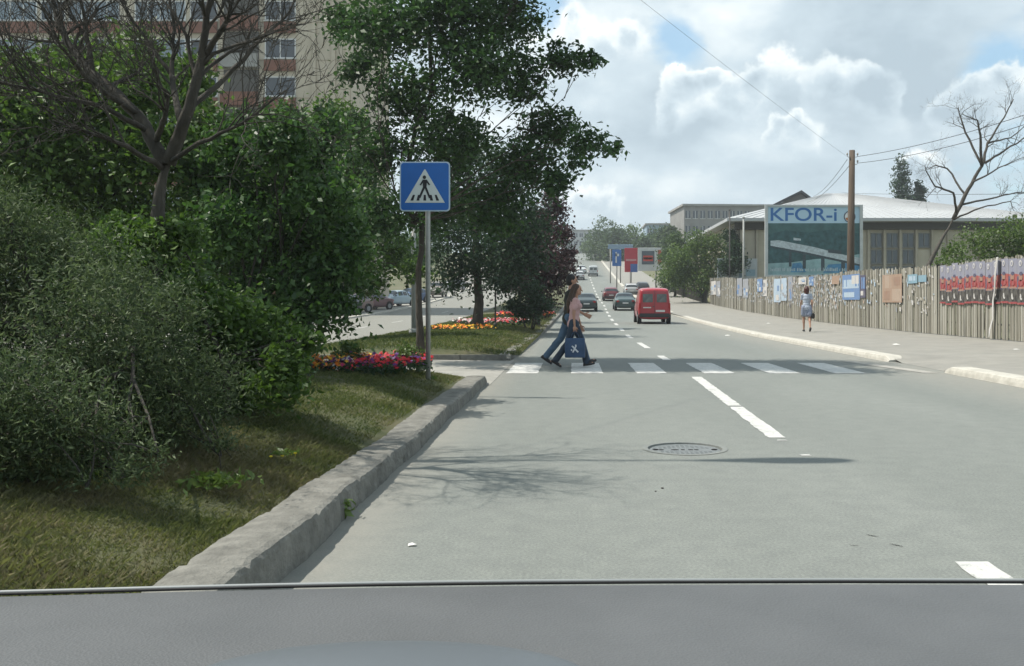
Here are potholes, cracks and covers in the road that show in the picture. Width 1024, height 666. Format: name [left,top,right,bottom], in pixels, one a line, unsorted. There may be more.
manhole cover [642,442,728,455]
